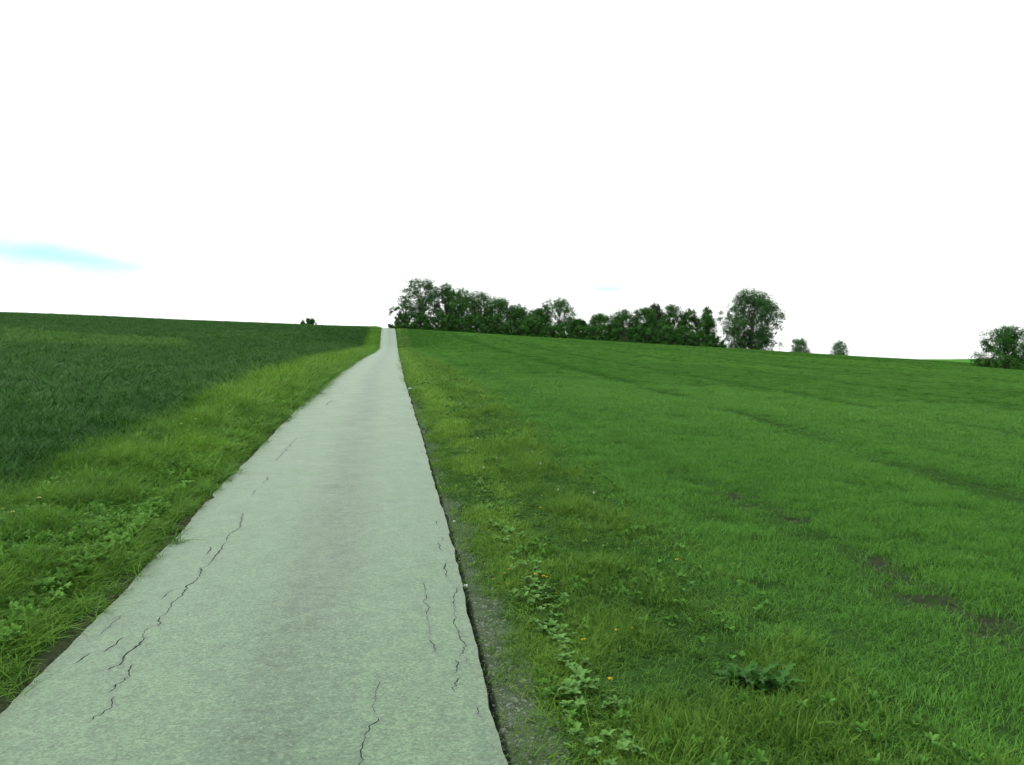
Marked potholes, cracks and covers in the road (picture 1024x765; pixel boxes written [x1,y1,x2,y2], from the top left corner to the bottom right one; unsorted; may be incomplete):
crack [76,513,244,721]
crack [435,521,470,692]
crack [359,683,380,765]
